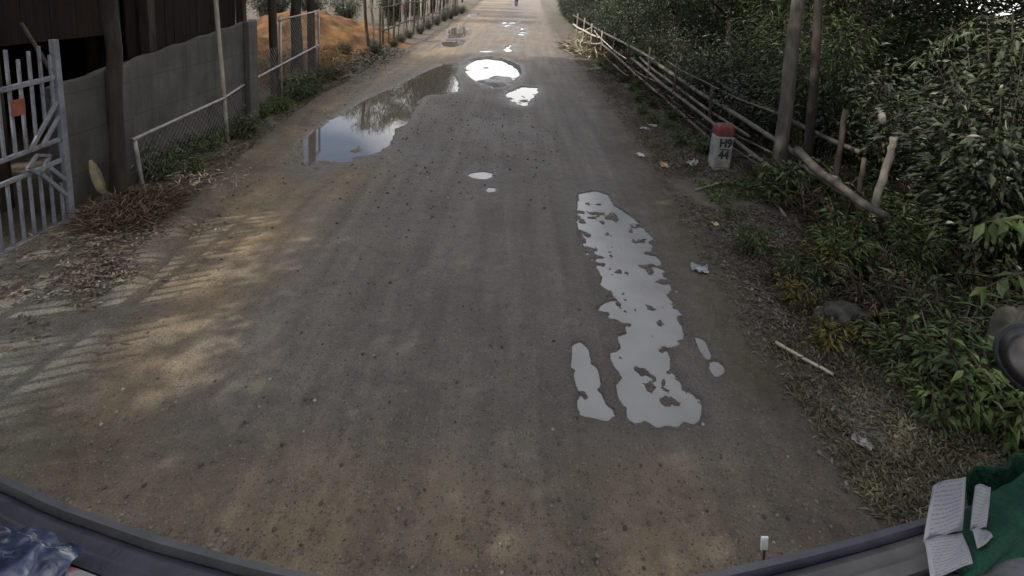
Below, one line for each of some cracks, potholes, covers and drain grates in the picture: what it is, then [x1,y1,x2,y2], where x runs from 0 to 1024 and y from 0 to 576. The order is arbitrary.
pothole [467,171,493,179]
pothole [505,86,540,106]
pothole [288,63,461,175]
pothole [462,56,522,88]
pothole [446,26,473,38]
pothole [575,190,704,428]
pothole [440,39,467,47]
